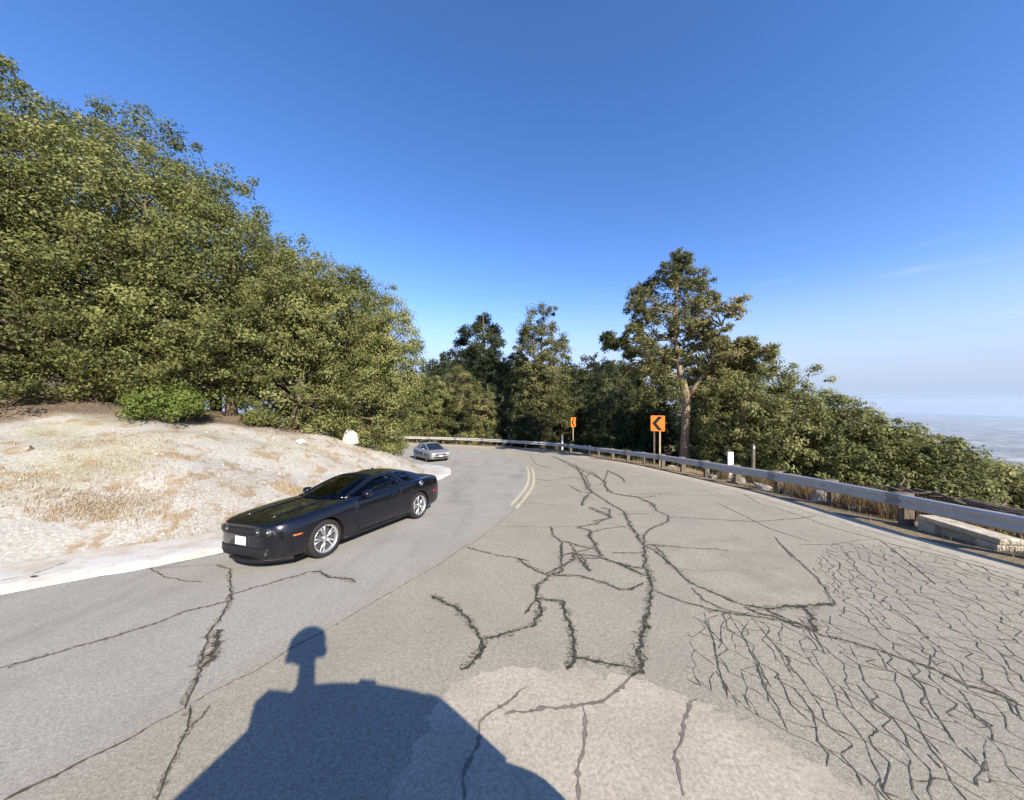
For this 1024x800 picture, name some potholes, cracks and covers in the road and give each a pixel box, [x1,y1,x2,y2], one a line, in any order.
crack [430,450,1024,800]
crack [0,564,357,800]
